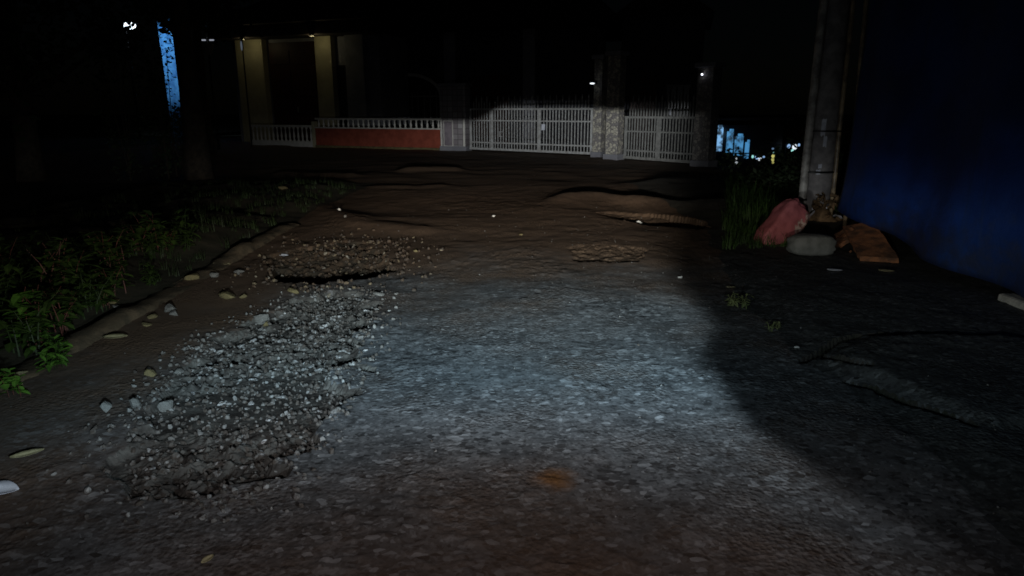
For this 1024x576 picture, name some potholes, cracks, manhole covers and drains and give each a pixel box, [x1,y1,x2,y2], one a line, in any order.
pothole [265,241,396,284]
crack [797,332,1024,427]
pothole [99,290,383,501]
